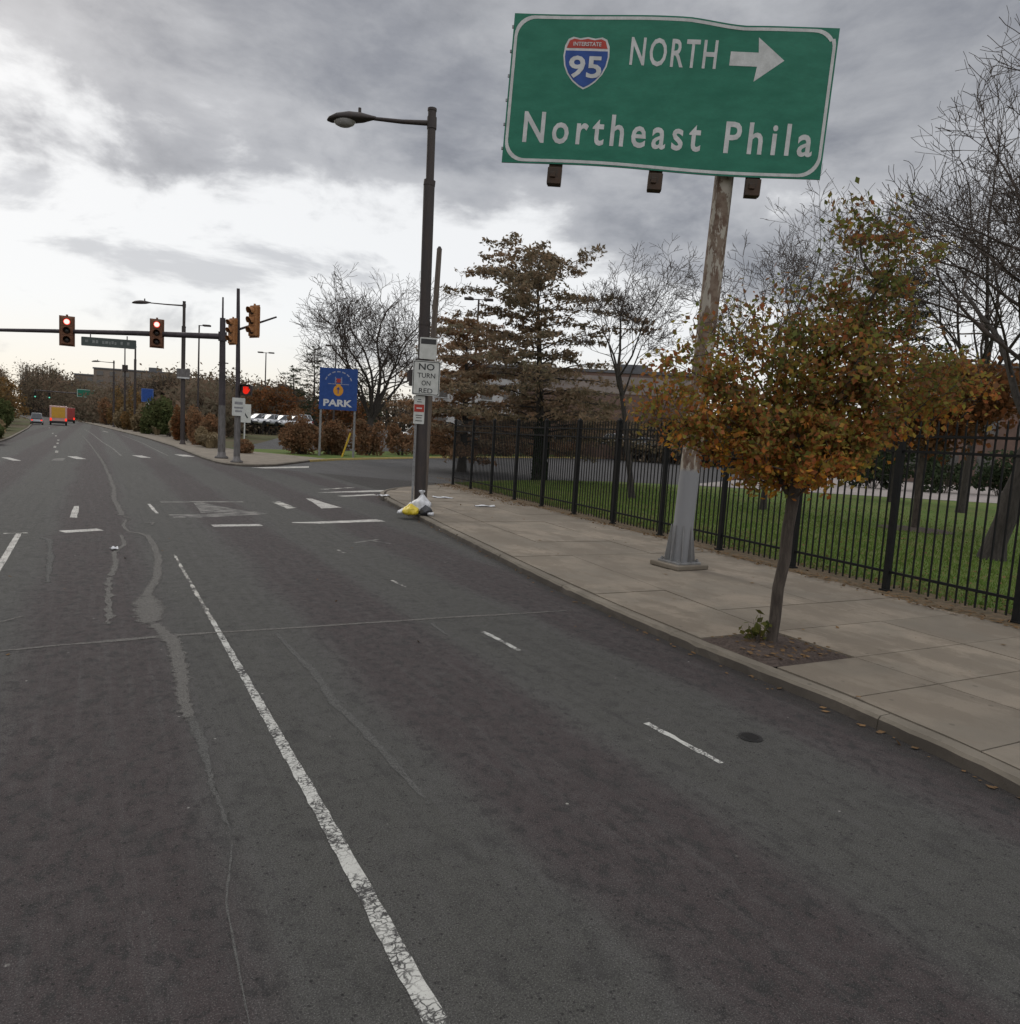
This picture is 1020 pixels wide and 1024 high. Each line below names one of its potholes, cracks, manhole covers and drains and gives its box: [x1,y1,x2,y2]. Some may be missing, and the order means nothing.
manhole cover [738,732,763,742]
